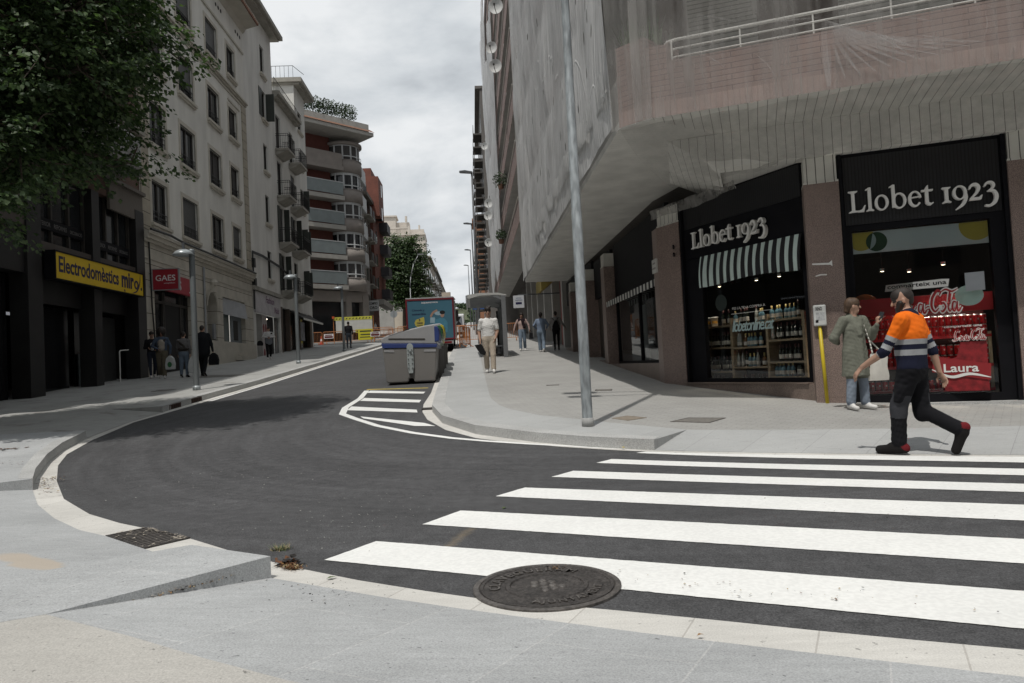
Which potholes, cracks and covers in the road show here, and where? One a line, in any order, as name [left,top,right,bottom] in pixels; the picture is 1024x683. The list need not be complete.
drain grate [105,527,190,549]
manhole cover [473,564,622,612]
